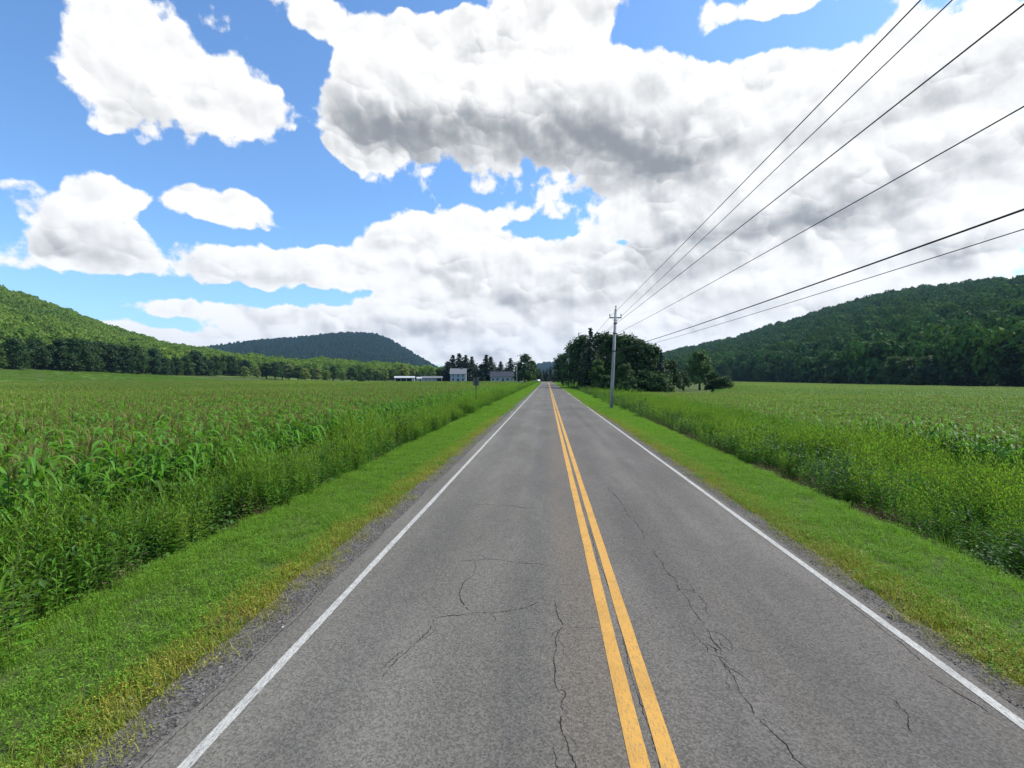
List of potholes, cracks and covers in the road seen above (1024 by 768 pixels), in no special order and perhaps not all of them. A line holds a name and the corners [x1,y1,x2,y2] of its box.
crack [608,489,806,768]
crack [379,555,581,768]
crack [828,588,991,714]
